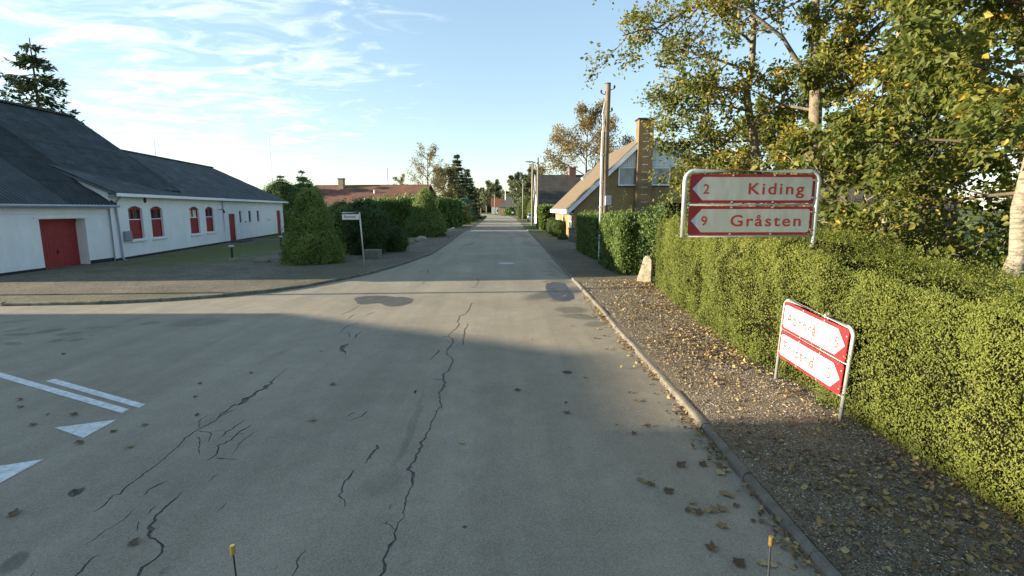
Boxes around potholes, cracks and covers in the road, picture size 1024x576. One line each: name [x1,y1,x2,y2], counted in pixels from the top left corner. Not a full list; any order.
crack [75,370,285,576]
crack [338,444,379,507]
crack [379,278,479,576]
